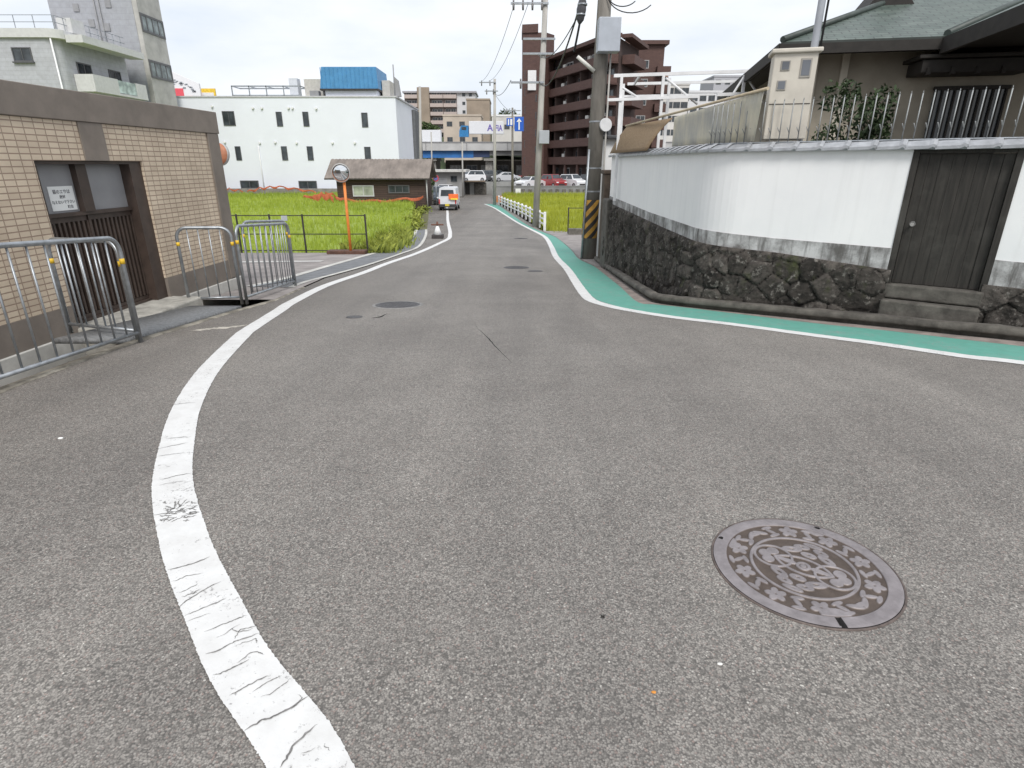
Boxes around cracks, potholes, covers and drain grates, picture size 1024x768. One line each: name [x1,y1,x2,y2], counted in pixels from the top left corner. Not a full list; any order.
manhole cover [372,301,423,309]
crack [156,473,198,522]
crack [168,557,329,766]
manhole cover [711,518,908,631]
